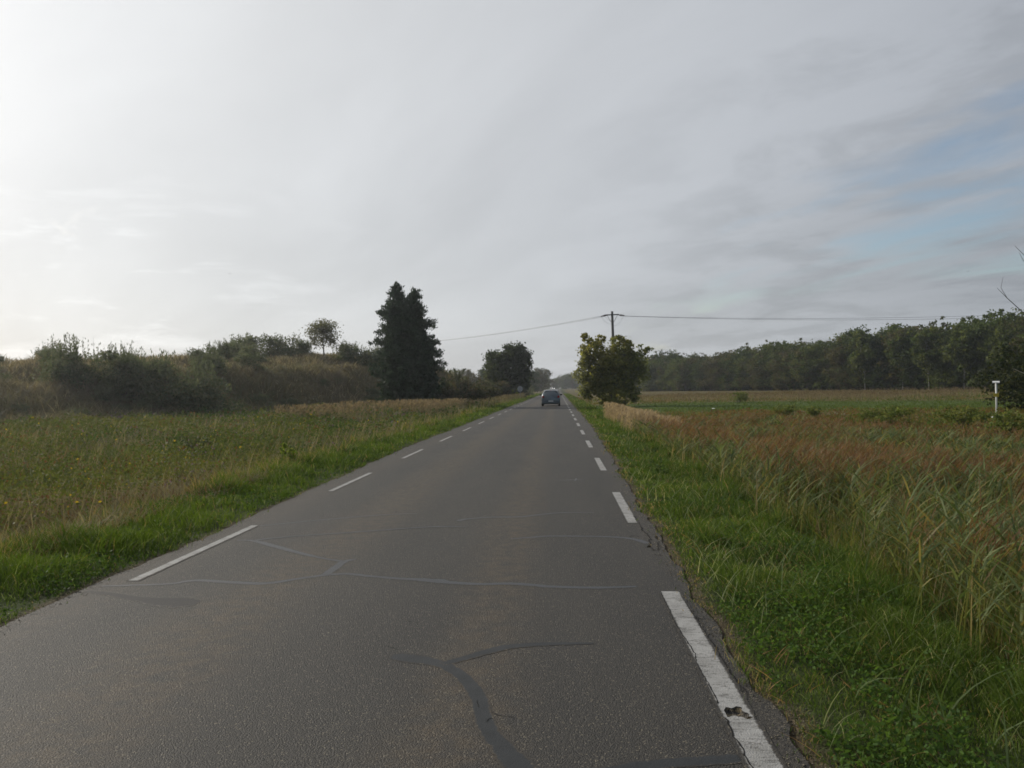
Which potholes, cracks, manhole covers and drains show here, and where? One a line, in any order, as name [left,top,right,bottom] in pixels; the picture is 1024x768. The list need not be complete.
crack [84,512,662,609]
